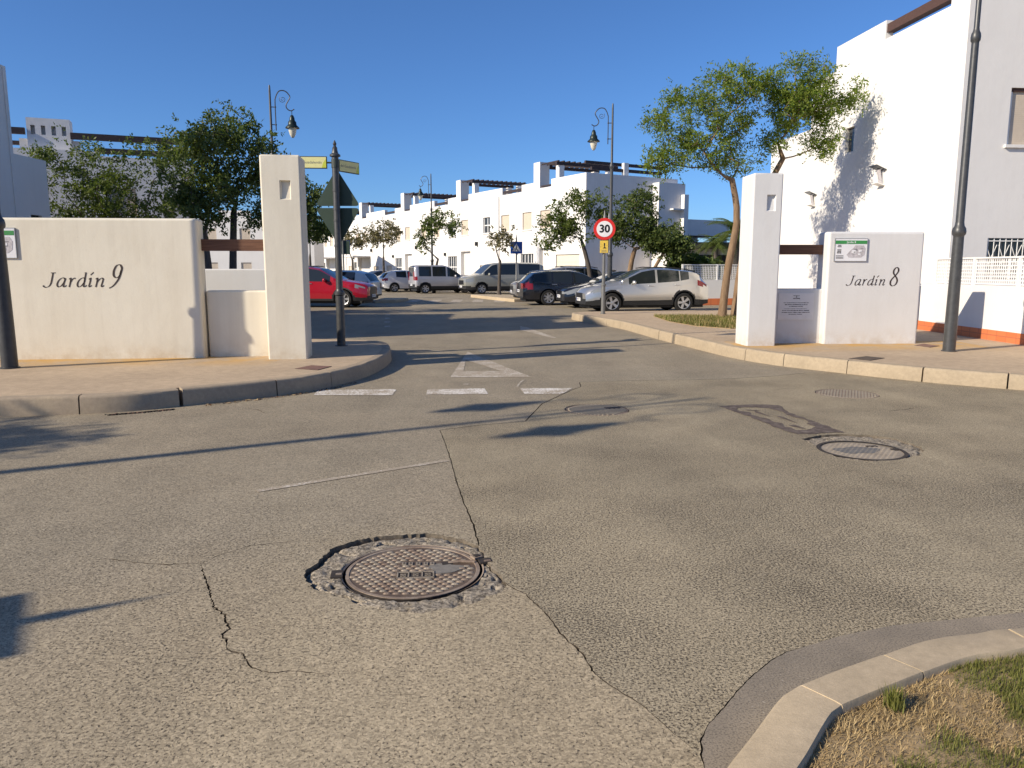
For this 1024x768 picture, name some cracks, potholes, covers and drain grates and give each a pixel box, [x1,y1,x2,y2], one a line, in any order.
manhole cover [803,434,924,461]
manhole cover [815,389,880,399]
manhole cover [564,404,630,416]
manhole cover [304,533,506,614]
crack [501,582,688,745]
crack [92,540,335,675]
